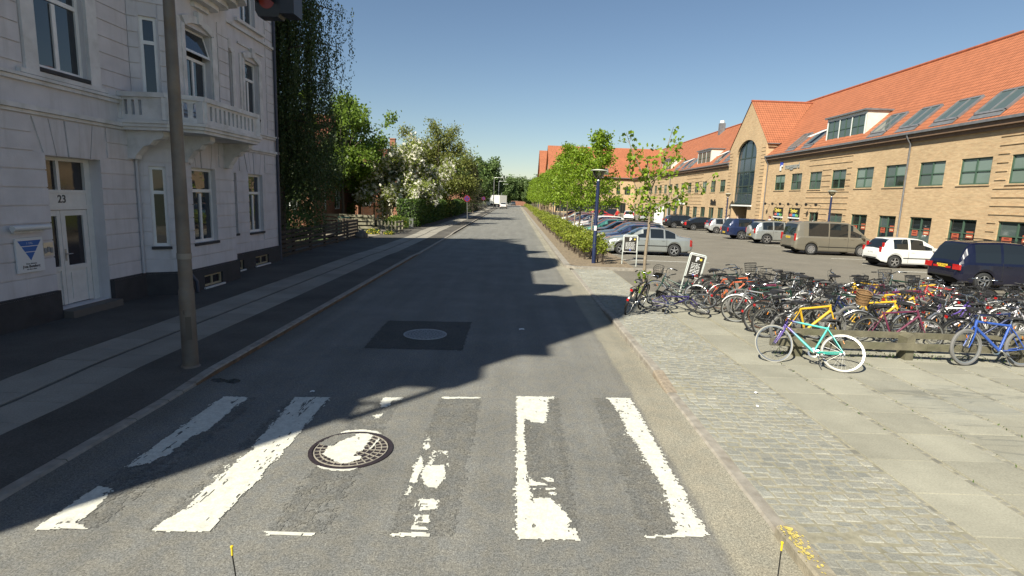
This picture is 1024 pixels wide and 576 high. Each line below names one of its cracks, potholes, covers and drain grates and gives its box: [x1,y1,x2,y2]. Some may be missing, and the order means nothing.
manhole cover [308,429,393,471]
manhole cover [403,329,447,340]
